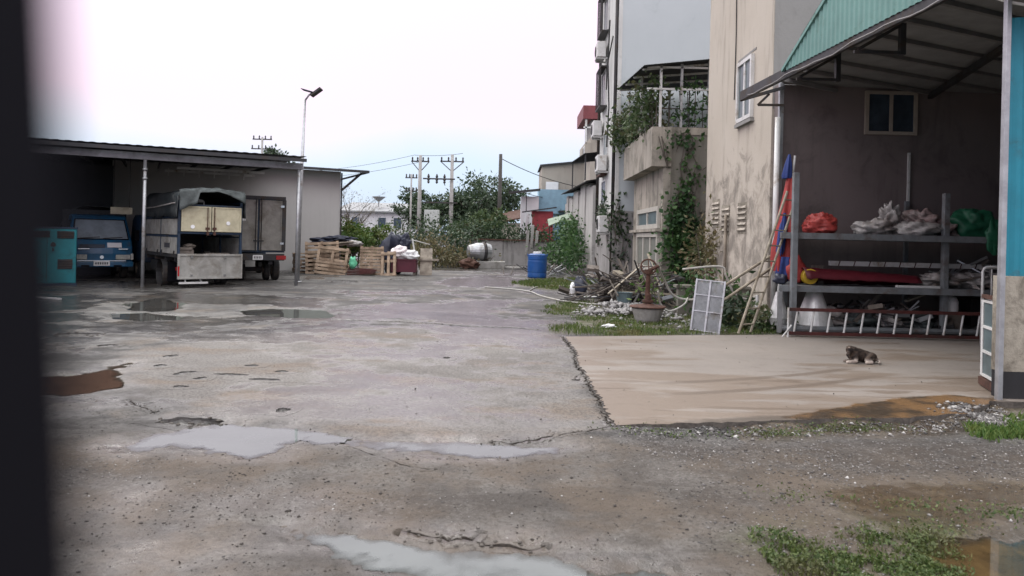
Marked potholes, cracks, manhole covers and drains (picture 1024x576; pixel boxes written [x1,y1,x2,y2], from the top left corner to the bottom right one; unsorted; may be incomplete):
crack [123,398,163,414]
crack [398,527,550,558]
pothole [130,413,249,432]
crack [491,336,616,447]
